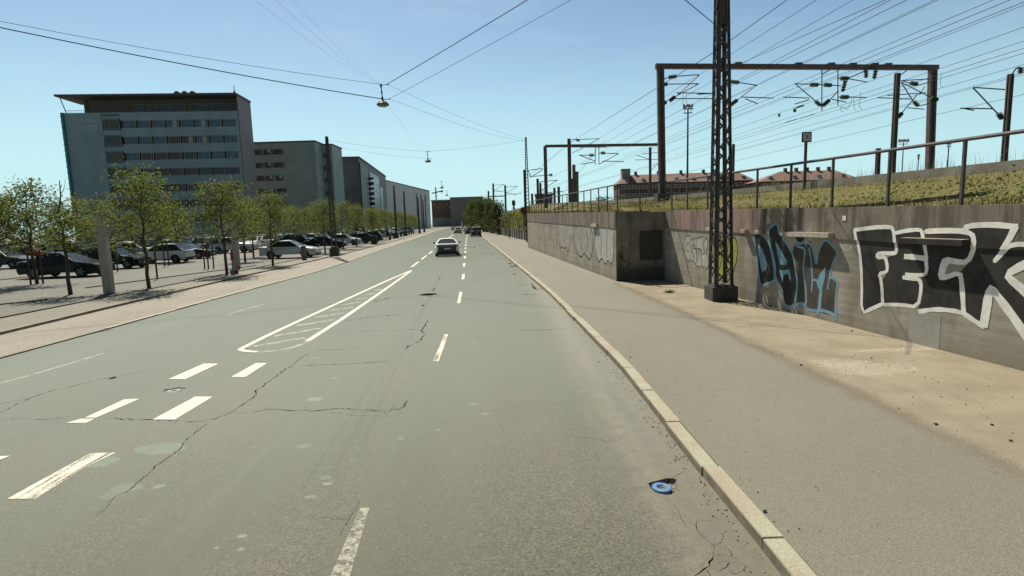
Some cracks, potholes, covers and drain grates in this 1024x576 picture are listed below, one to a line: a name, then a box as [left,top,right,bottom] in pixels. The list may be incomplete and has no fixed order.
crack [115,349,407,422]
crack [98,424,206,514]
crack [674,505,747,576]
